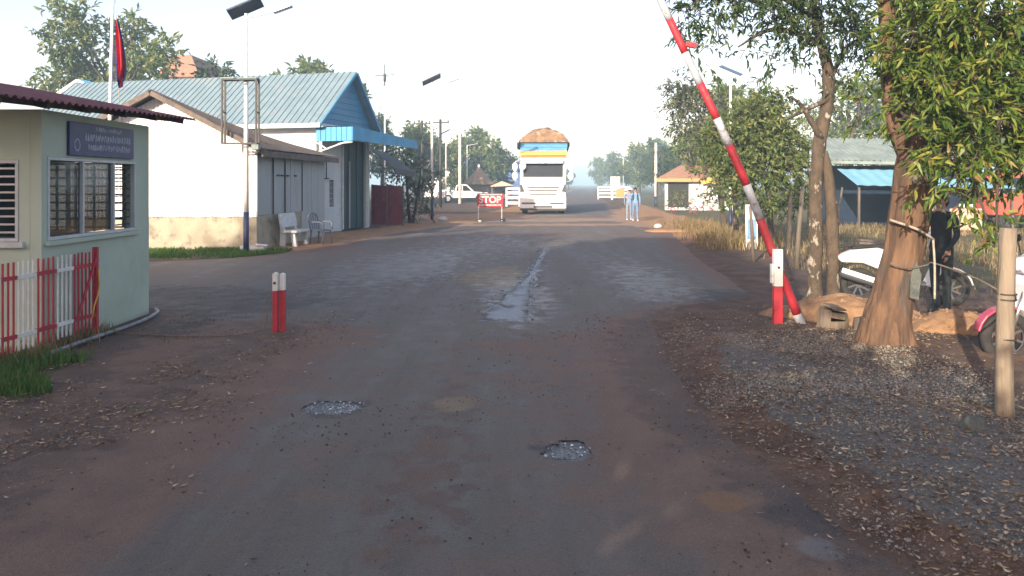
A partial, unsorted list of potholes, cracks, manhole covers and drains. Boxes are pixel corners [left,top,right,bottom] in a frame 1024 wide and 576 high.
pothole [540,440,592,461]
pothole [302,401,366,415]
